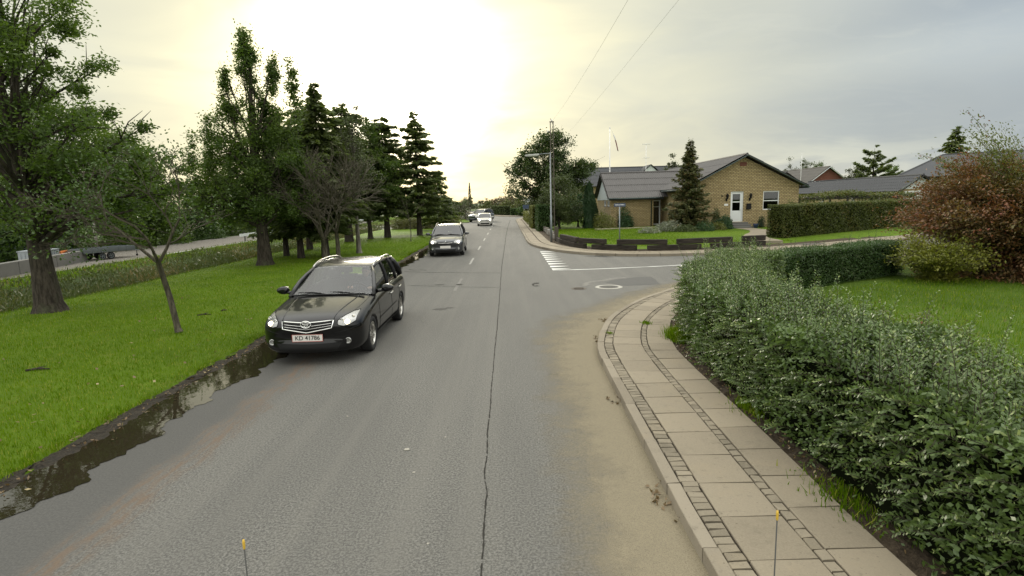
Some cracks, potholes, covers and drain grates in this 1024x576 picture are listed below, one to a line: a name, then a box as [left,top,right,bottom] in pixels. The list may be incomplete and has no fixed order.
crack [480,222,510,576]
